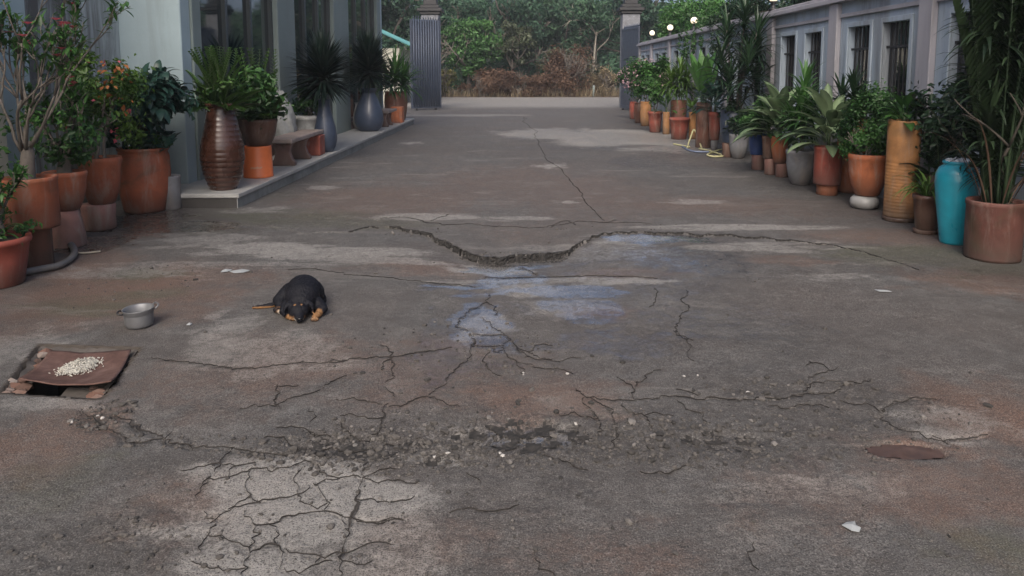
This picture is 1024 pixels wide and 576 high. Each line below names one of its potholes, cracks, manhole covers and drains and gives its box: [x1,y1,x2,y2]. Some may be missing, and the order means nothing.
pothole [298,435,425,460]
crack [81,119,988,575]
manhole cover [1,346,138,399]
pothole [451,419,591,453]
